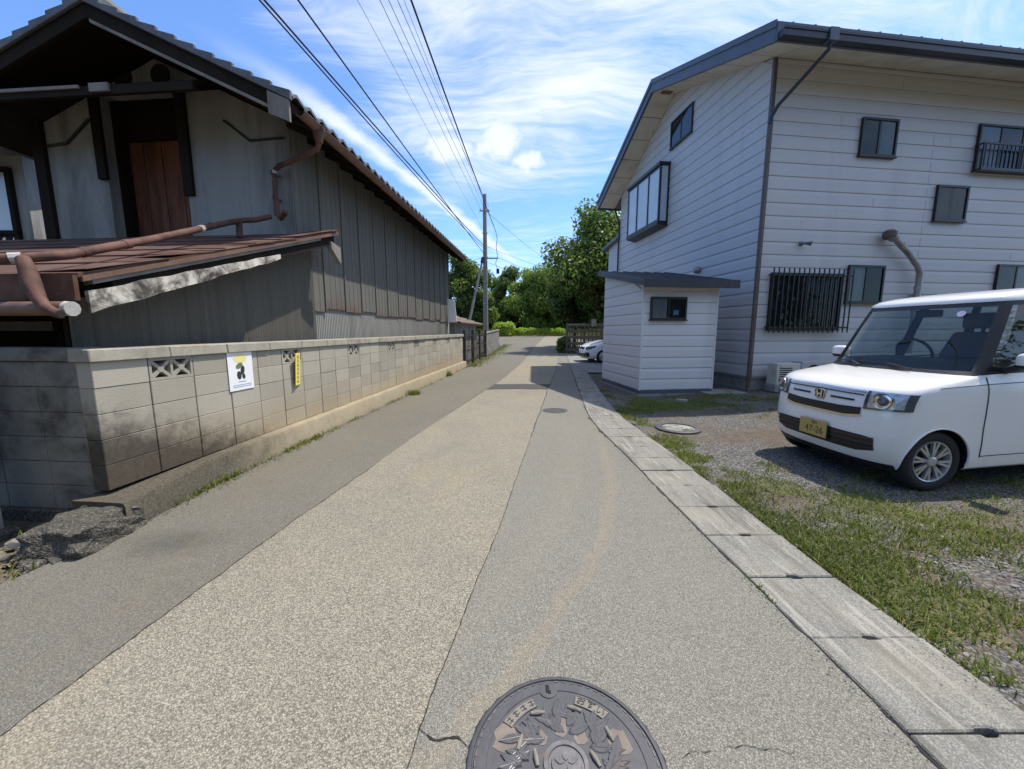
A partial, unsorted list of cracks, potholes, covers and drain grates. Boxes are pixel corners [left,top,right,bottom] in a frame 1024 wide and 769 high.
manhole cover [466,676,668,769]
crack [406,365,557,769]
crack [565,365,942,769]
manhole cover [655,422,701,435]
